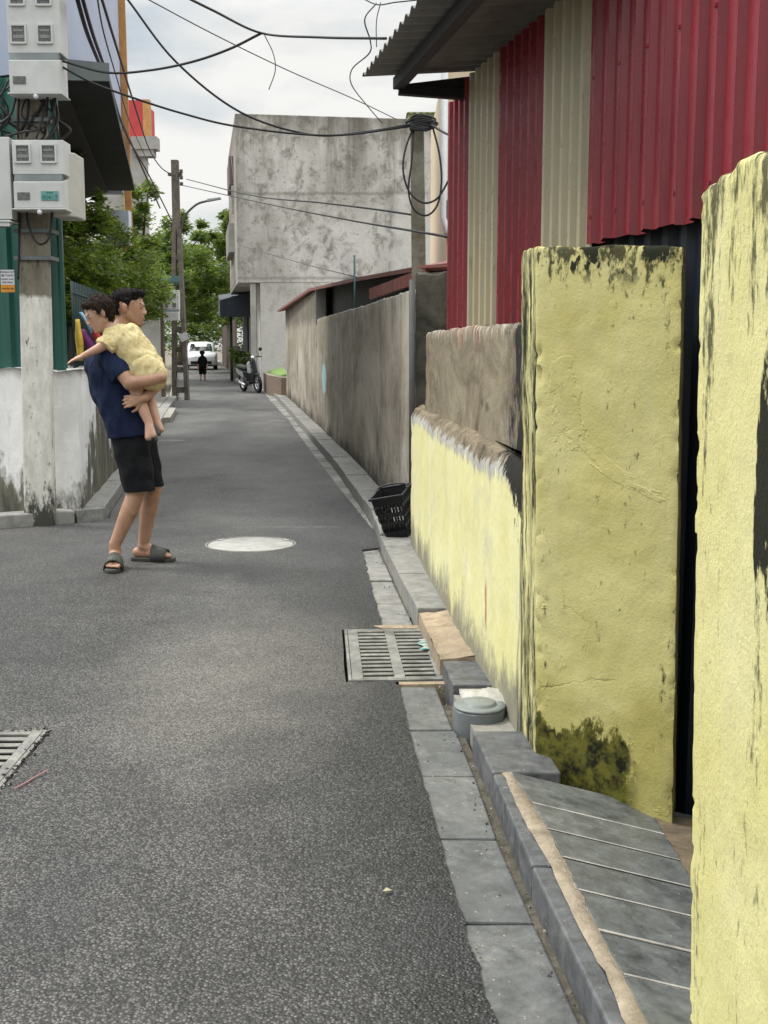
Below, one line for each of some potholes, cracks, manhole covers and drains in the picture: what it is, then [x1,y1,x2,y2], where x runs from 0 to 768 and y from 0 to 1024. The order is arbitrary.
manhole cover [205,536,296,552]
drain grate [0,730,49,789]
drain grate [344,628,443,682]
